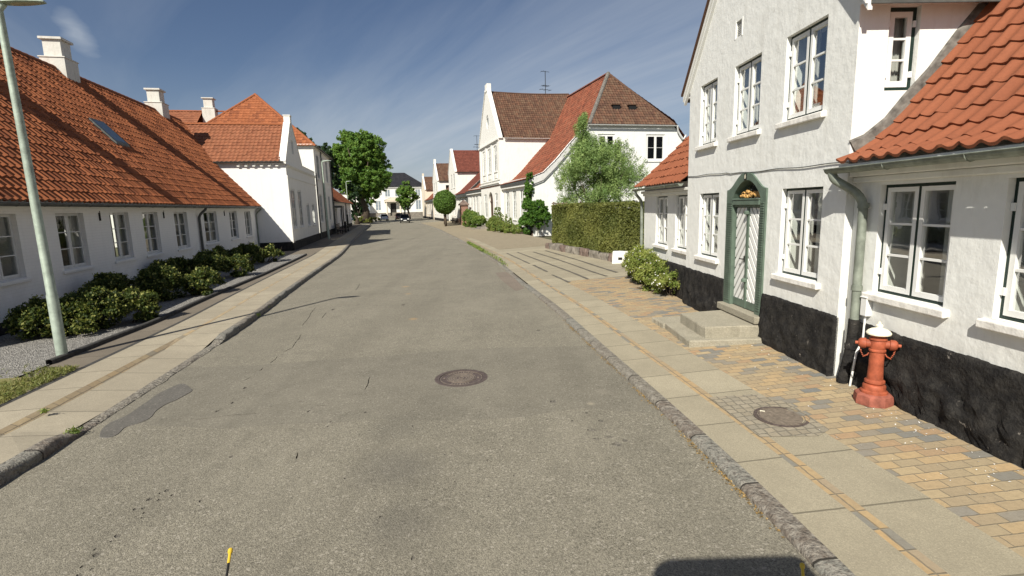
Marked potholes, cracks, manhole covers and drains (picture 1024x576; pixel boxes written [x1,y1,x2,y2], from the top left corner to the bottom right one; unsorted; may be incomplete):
manhole cover [753,407,809,427]
manhole cover [435,369,488,387]
